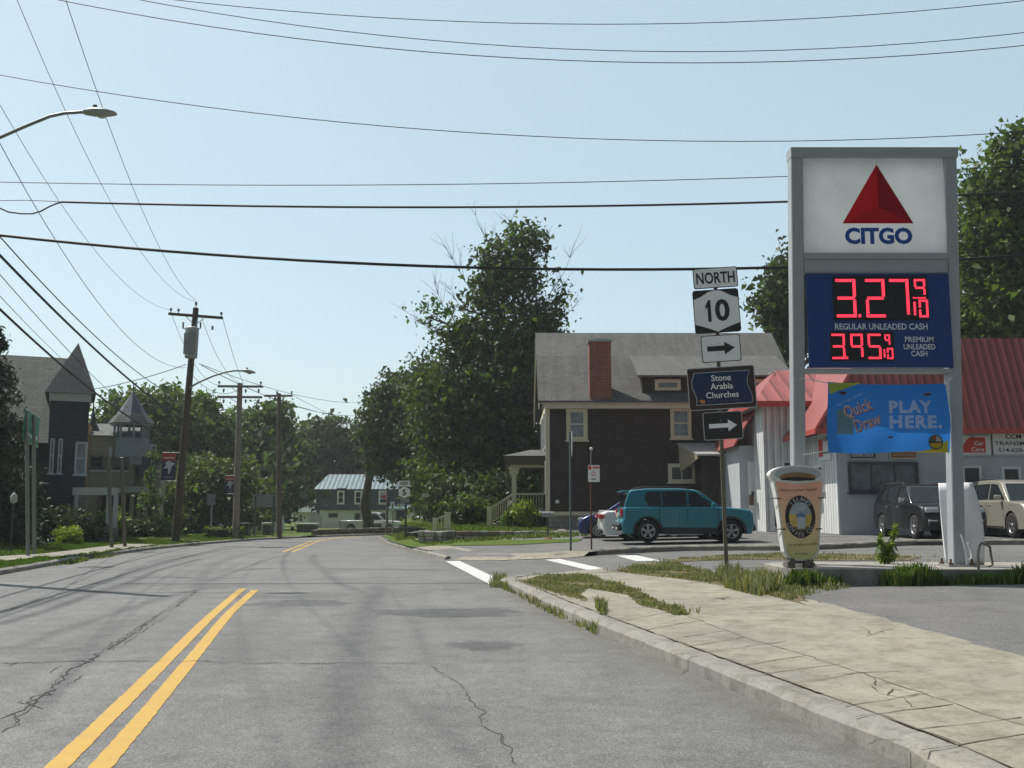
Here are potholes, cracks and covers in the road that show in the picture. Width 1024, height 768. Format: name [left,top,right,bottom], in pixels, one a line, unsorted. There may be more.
crack [871,678,924,709]
crack [0,590,606,764]
